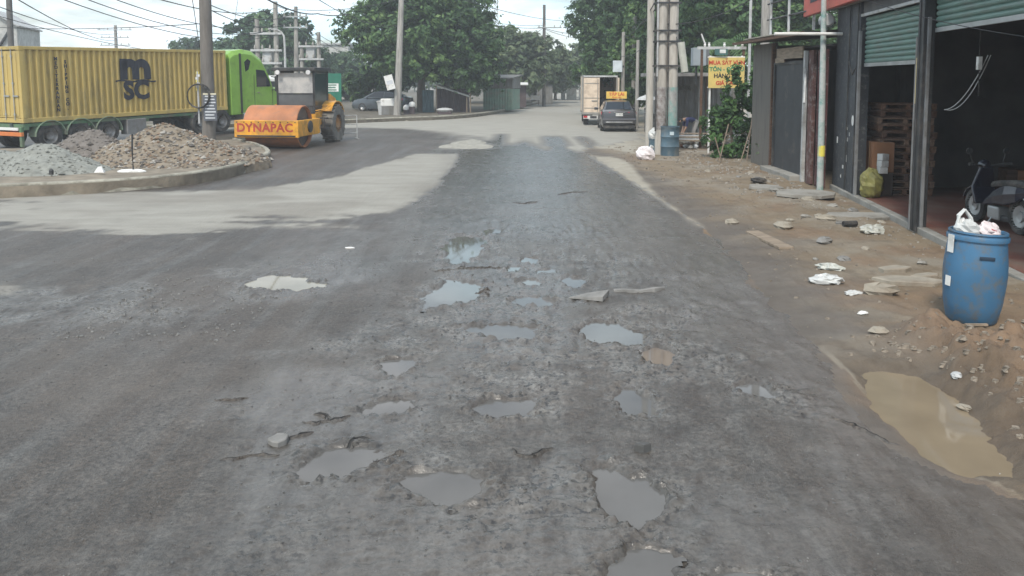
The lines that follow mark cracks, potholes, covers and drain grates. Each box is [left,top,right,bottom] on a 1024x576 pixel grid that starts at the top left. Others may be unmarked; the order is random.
pothole [573,316,658,349]
pothole [388,463,501,512]
pothole [455,320,554,340]
crack [220,412,404,466]
pothole [355,395,422,416]
pothole [377,354,422,377]
pothole [634,341,678,369]
pothole [433,232,492,265]
pothole [587,539,689,576]
pothole [286,437,395,483]
pothole [460,392,542,422]
pothole [609,380,667,419]
